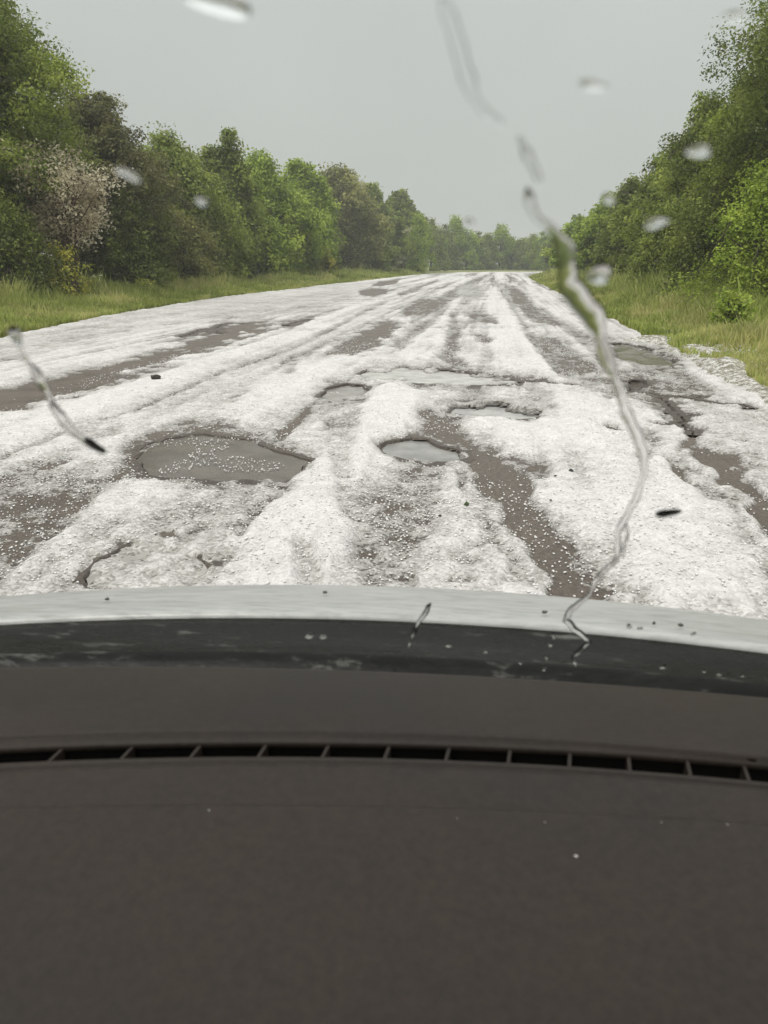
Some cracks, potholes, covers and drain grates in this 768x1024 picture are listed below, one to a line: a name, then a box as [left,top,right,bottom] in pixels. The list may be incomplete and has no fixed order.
pothole [124,432,315,489]
pothole [377,436,476,466]
pothole [315,383,372,403]
pothole [611,342,684,371]
